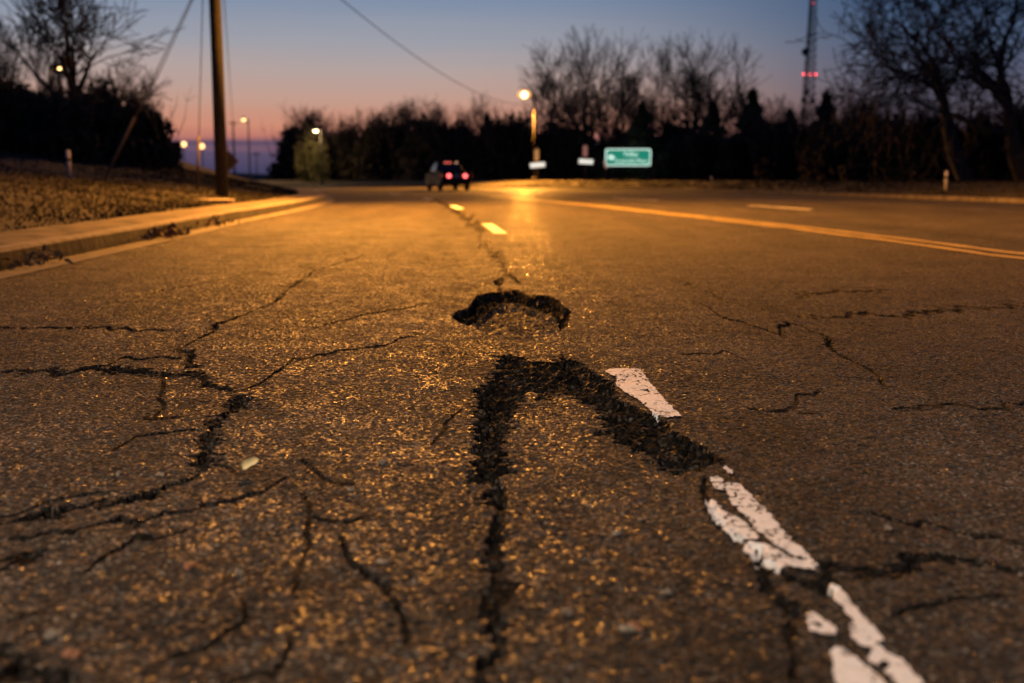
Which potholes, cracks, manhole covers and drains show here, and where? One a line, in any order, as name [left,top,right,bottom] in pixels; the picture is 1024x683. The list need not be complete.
crack [0,254,426,451]
crack [683,282,1024,411]
crack [768,511,1024,616]
crack [0,458,411,646]
crack [165,596,297,683]
pothole [451,289,572,347]
crack [0,604,80,683]
crack [499,270,521,284]
